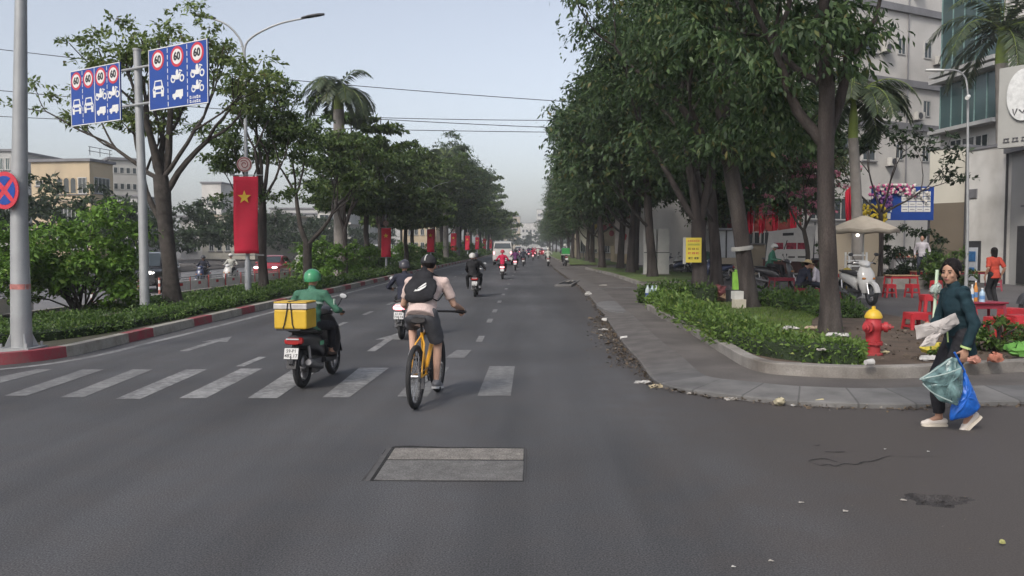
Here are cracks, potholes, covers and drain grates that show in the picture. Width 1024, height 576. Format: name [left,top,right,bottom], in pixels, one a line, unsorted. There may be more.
manhole cover [361,446,527,482]
crack [811,445,887,466]
